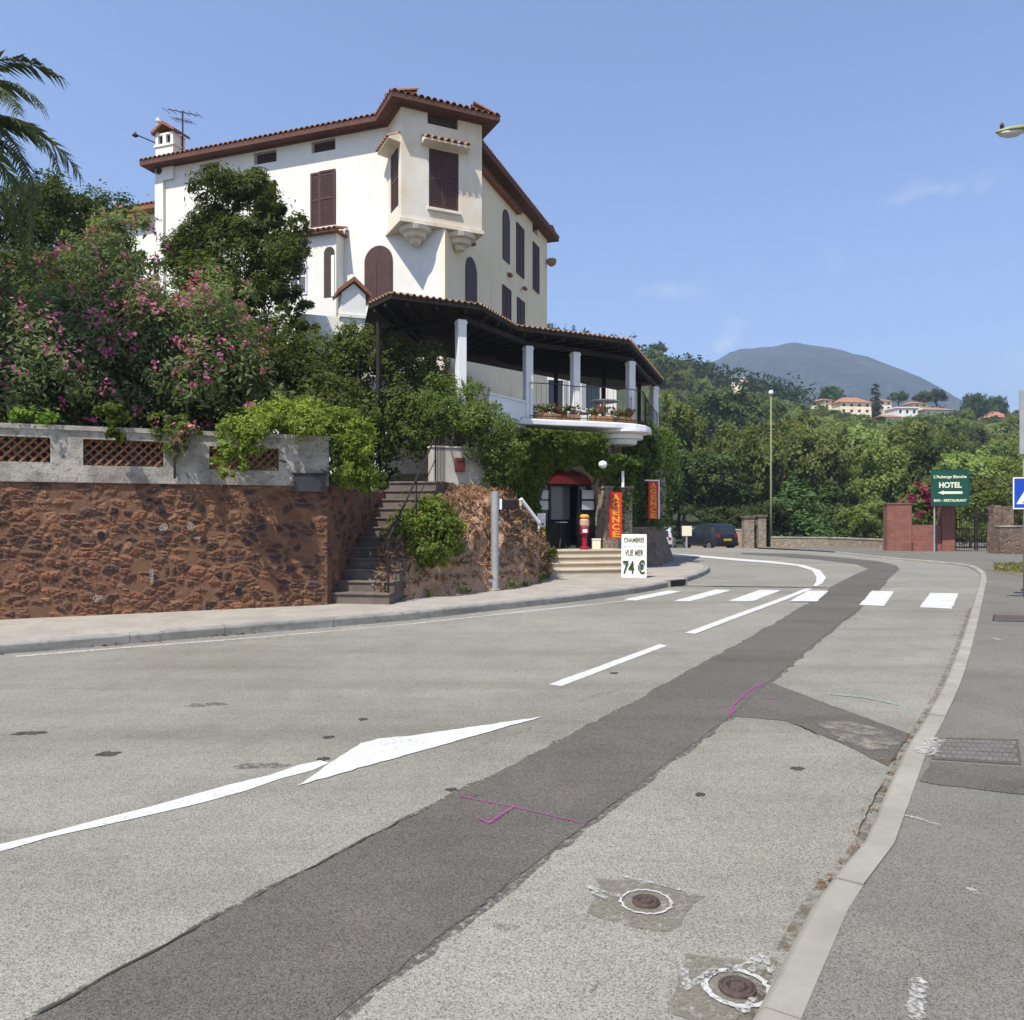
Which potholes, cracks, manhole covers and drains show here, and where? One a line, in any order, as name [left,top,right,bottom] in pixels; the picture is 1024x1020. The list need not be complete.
utility cover [718,975,757,999]
utility cover [931,737,1022,766]
utility cover [632,894,660,909]
